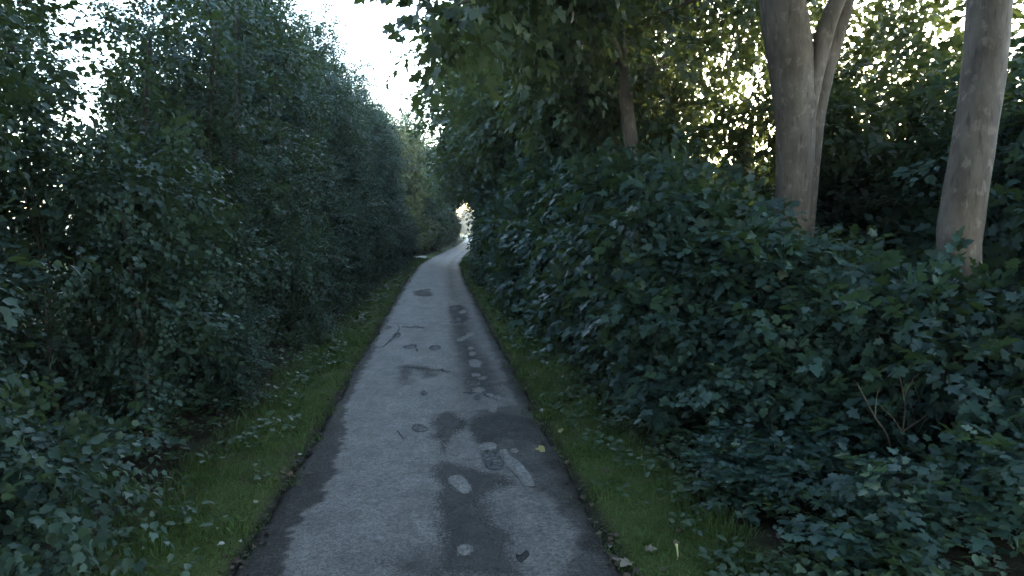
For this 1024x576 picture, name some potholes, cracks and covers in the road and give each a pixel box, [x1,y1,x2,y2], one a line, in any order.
pothole [412,423,429,432]
